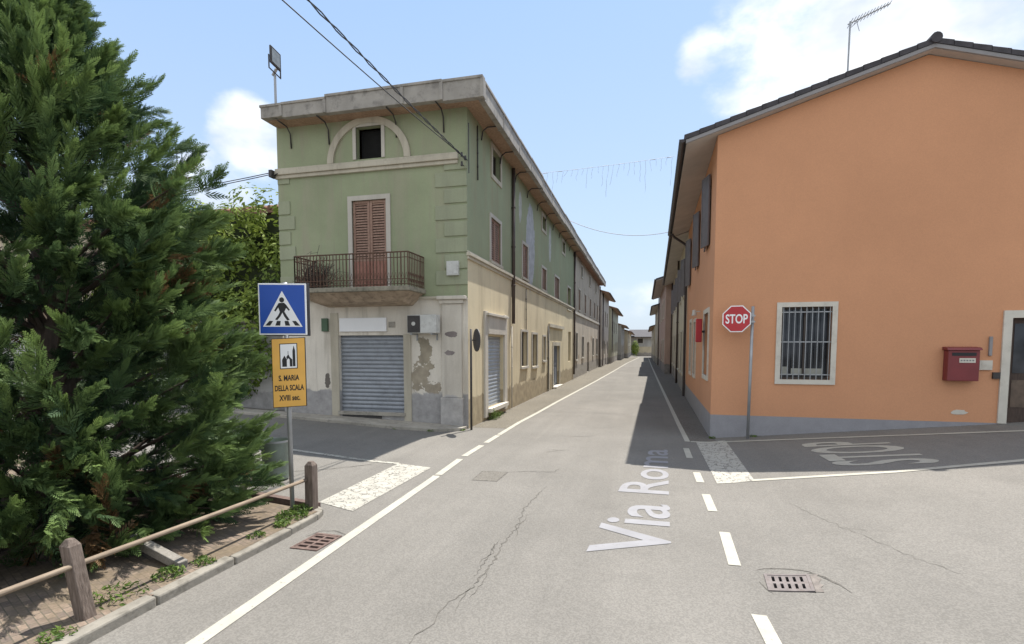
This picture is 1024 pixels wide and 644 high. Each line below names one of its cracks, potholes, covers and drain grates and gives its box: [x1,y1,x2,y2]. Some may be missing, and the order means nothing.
crack [412,486,547,640]
drain grate [290,533,342,551]
drain grate [764,574,824,593]
crack [790,503,978,580]
manhole cover [472,471,508,482]
crack [757,568,852,593]
